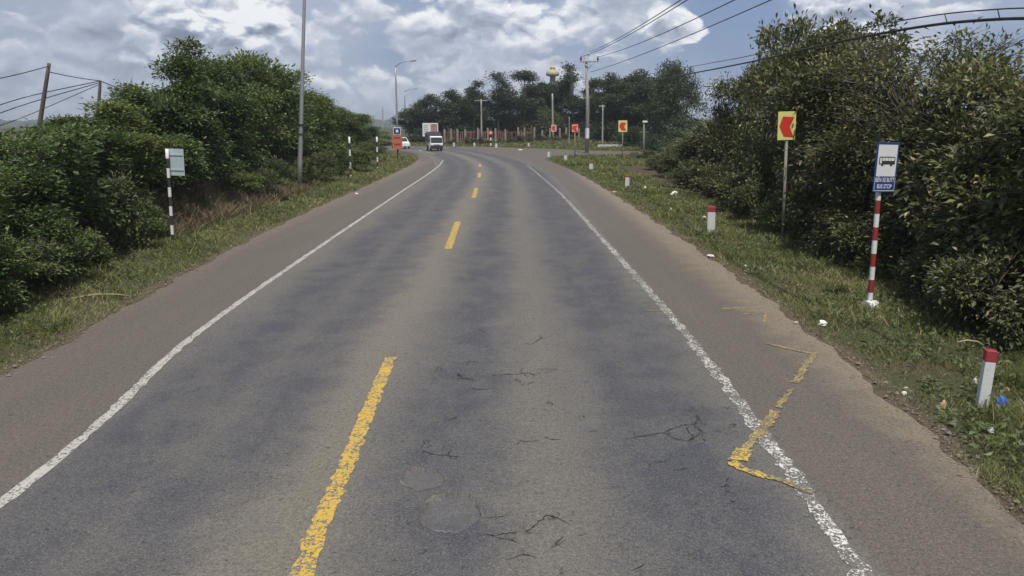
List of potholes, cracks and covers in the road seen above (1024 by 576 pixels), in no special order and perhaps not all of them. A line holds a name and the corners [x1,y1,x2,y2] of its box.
crack [483,513,565,559]
crack [434,360,557,391]
crack [626,408,708,442]
